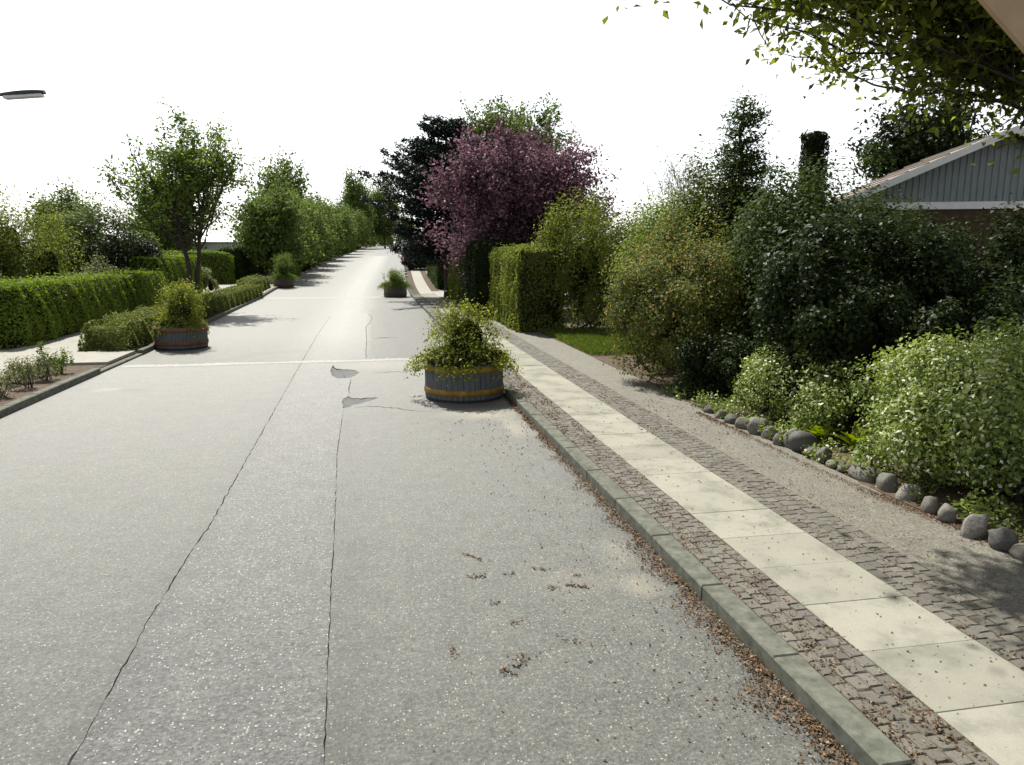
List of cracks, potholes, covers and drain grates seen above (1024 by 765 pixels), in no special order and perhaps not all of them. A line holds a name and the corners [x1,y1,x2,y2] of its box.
crack [323,411,344,762]
crack [67,324,325,765]
pothole [330,366,359,378]
pothole [342,396,378,408]
